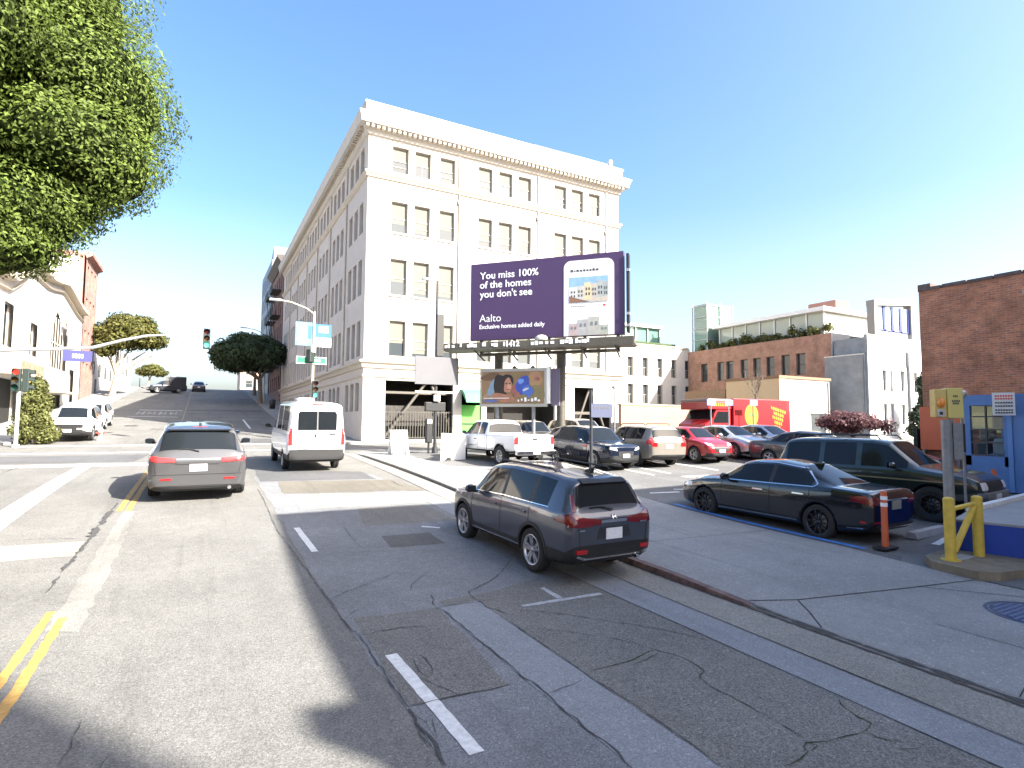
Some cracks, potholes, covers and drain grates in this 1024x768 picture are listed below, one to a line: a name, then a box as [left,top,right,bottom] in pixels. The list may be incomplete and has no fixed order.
utility cover [983,601,1024,623]
crack [257,488,920,766]
crack [12,502,118,593]
crack [57,720,82,767]
